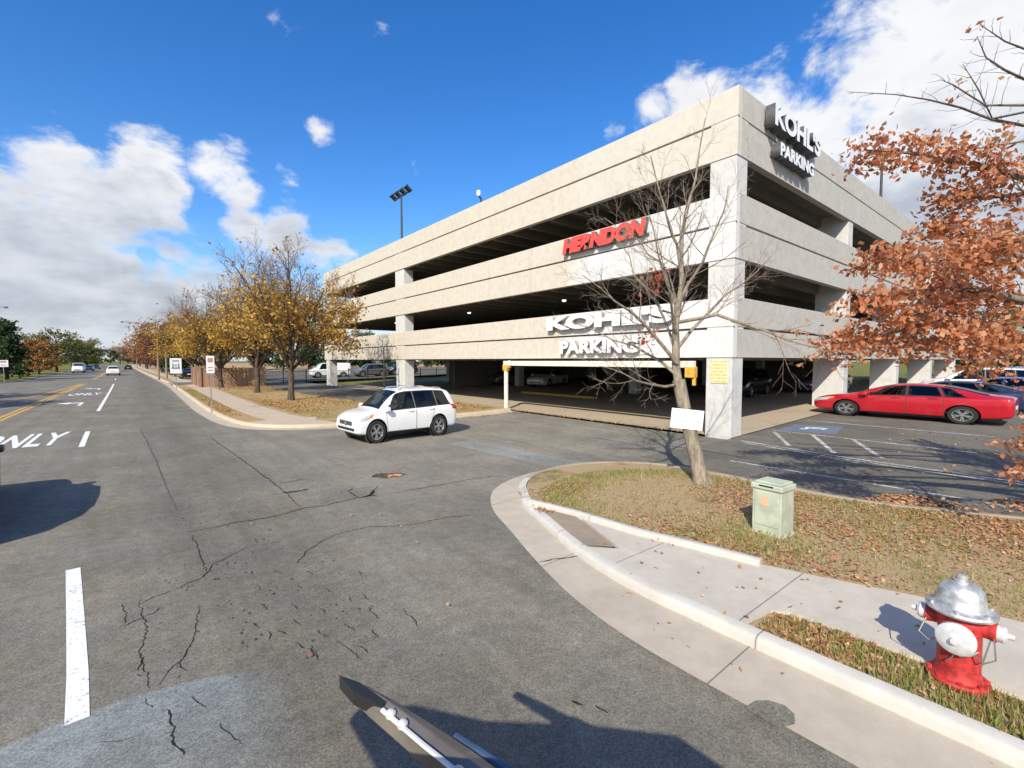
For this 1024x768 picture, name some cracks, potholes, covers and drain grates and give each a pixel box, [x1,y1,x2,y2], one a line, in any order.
crack [297,515,469,564]
crack [175,535,244,590]
crack [191,436,377,532]
crack [252,570,418,660]
crack [122,590,205,754]
